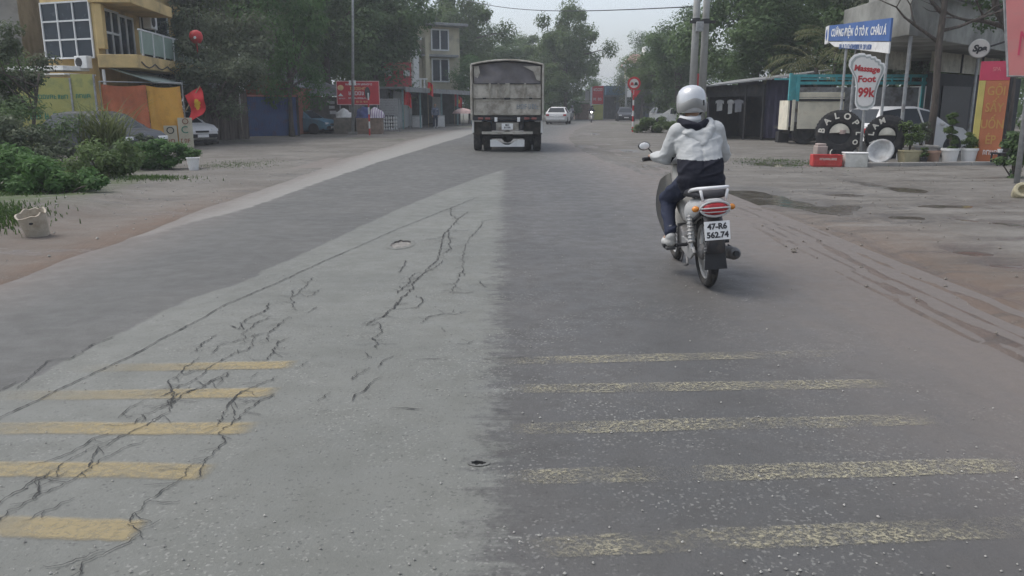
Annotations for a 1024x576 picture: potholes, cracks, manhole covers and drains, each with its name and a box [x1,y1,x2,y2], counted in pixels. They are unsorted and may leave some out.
crack [0,278,320,576]
crack [352,208,485,401]
